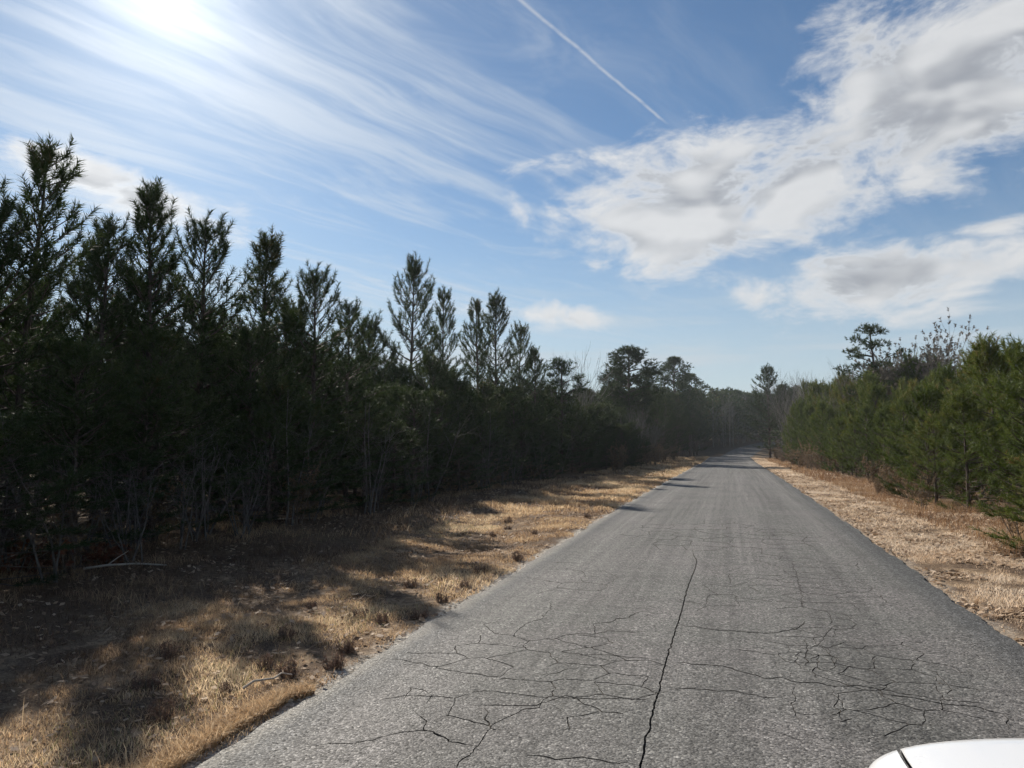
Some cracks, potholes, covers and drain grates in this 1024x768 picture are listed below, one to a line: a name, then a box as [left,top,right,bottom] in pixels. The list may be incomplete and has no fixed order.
crack [307,521,1024,768]
